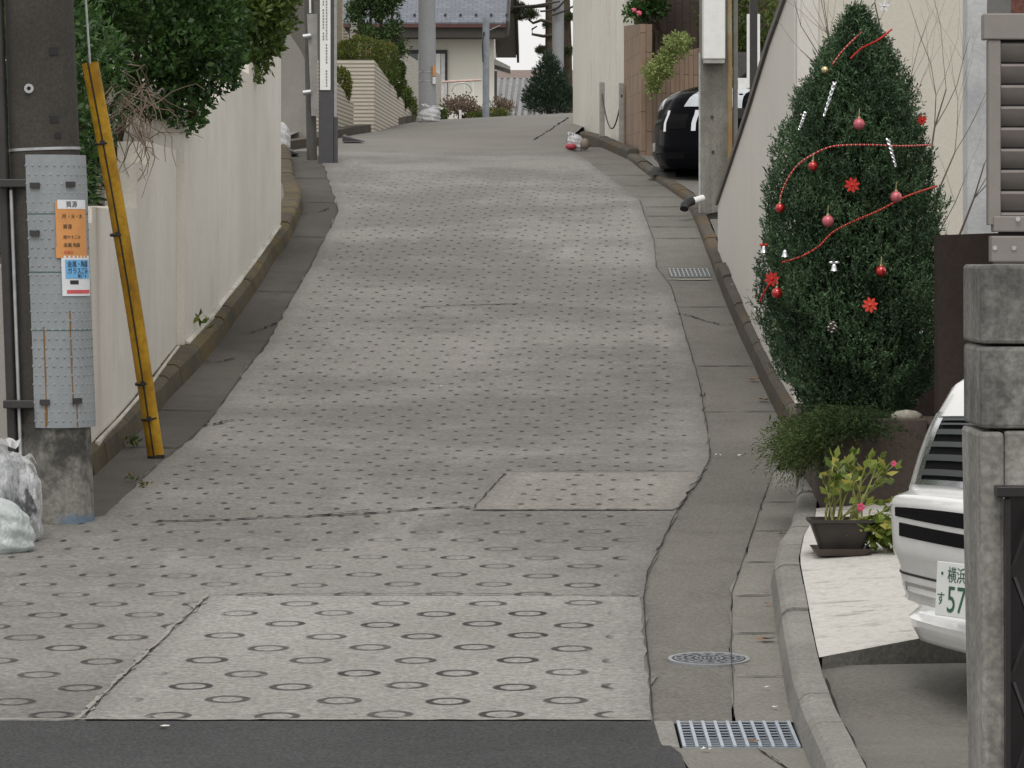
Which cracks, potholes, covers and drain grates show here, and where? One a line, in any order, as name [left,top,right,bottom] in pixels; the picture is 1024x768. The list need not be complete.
manhole cover [668,652,750,667]
drain grate [674,721,801,768]
drain grate [668,268,712,278]
